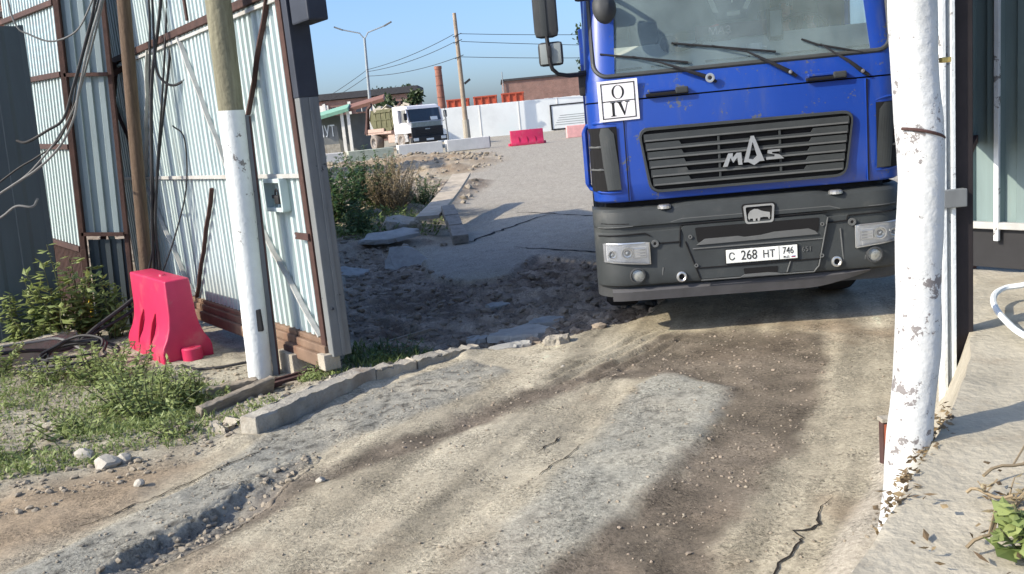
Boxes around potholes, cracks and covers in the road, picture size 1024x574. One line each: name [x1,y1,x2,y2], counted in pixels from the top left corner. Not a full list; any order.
pothole [88,453,320,574]
crack [539,436,581,475]
crack [456,212,593,245]
crack [773,500,829,574]
